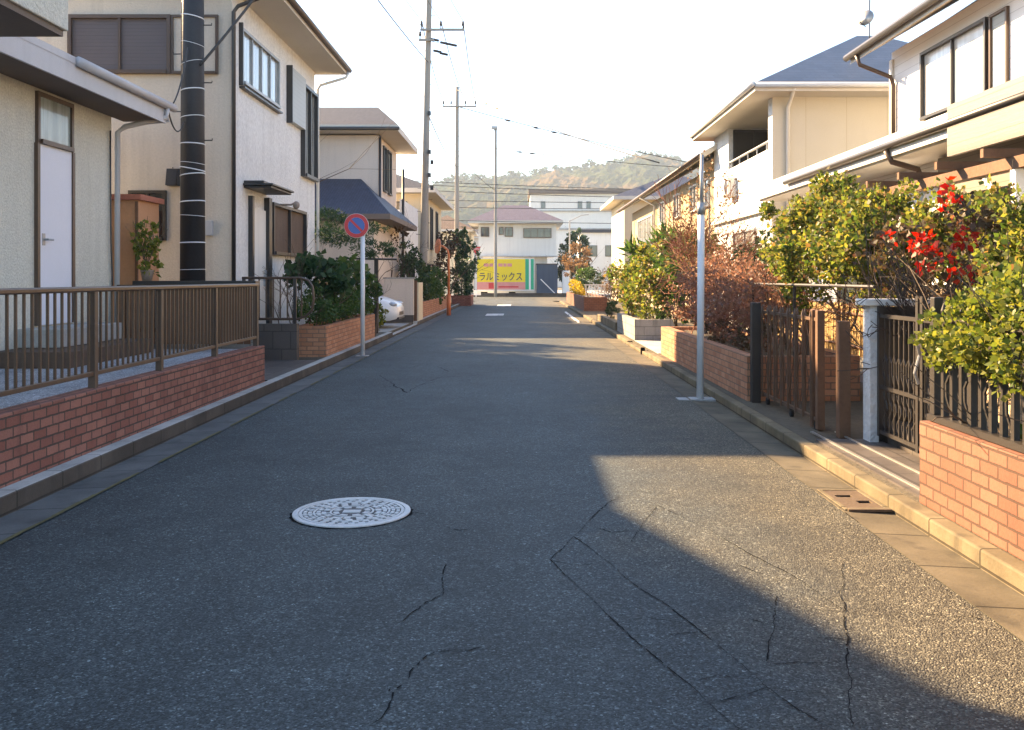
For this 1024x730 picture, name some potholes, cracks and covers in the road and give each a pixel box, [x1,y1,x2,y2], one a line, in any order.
manhole cover [289,497,414,529]
crack [374,563,483,723]
drain grate [817,489,892,514]
crack [551,491,981,730]
